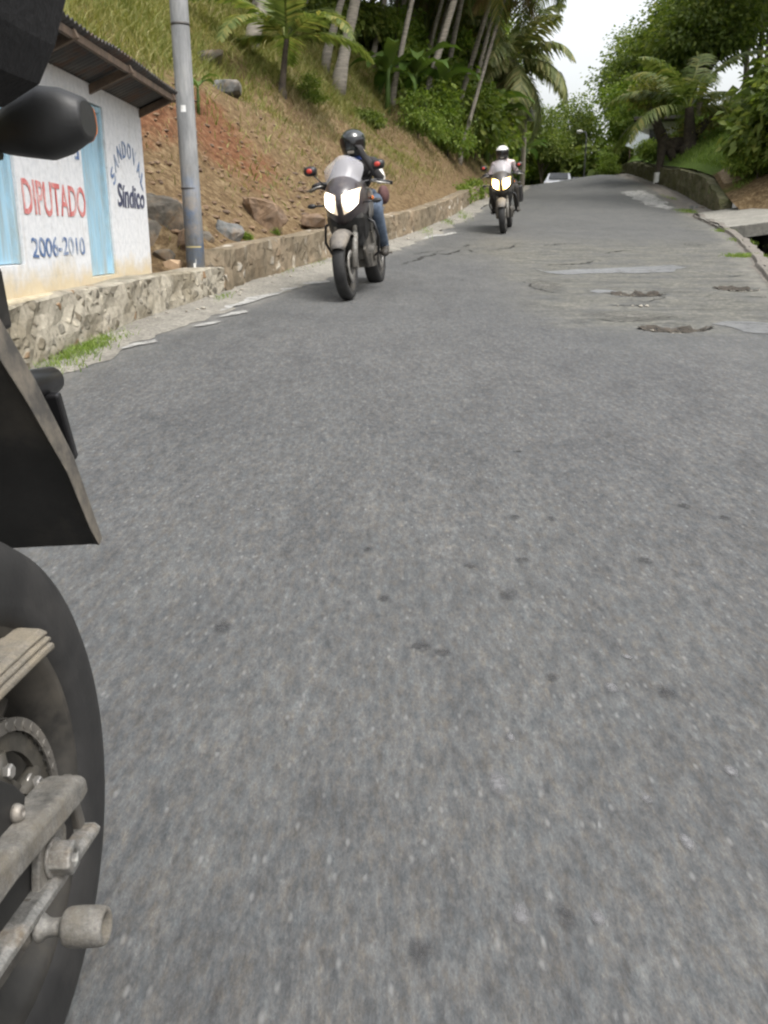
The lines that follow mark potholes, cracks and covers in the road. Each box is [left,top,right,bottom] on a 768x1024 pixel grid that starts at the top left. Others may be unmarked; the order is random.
crack [405,244,472,264]
pothole [638,325,714,333]
